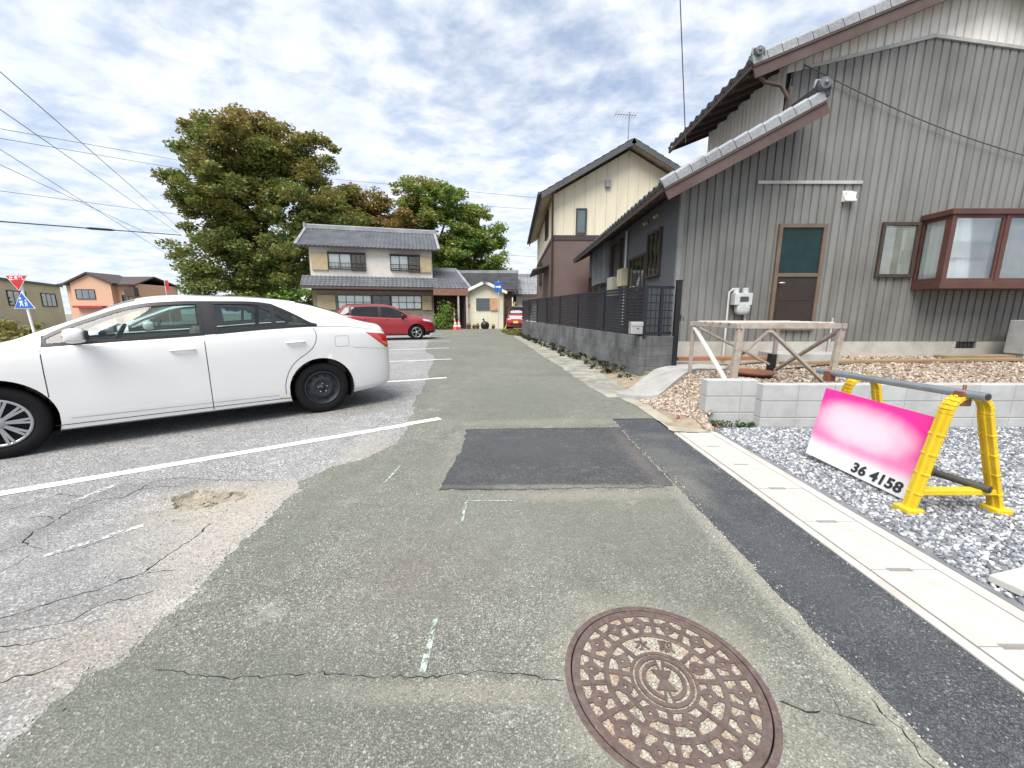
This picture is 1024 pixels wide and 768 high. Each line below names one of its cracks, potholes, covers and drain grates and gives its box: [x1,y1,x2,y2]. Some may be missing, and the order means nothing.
crack [780,675,935,768]
crack [0,477,258,571]
pothole [171,490,248,510]
crack [154,669,562,681]
crack [0,524,210,647]
manhole cover [565,607,783,768]
crack [0,656,77,683]
